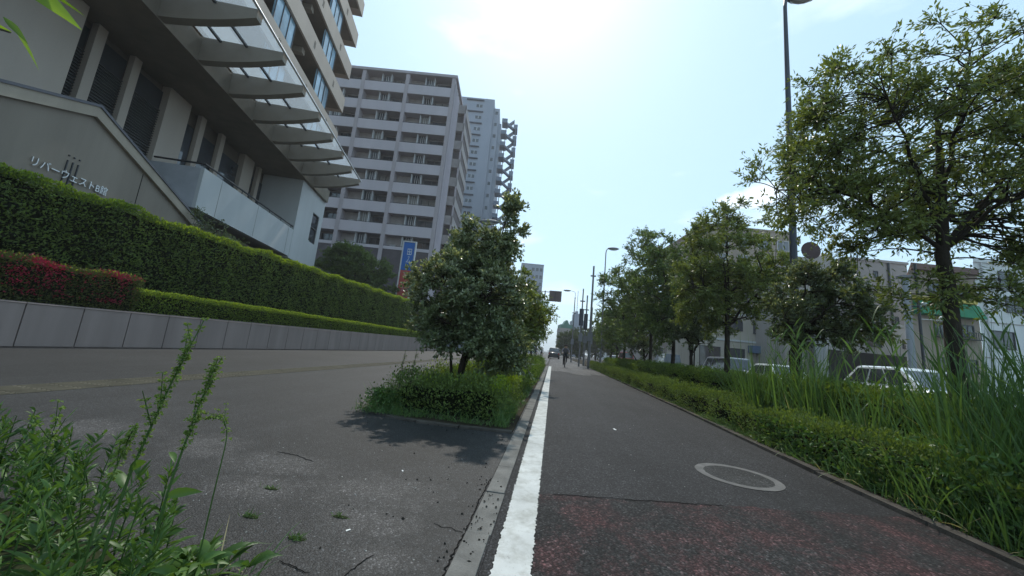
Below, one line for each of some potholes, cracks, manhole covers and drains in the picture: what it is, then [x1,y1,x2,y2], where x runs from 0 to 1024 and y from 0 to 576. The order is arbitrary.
manhole cover [695,463,786,491]
